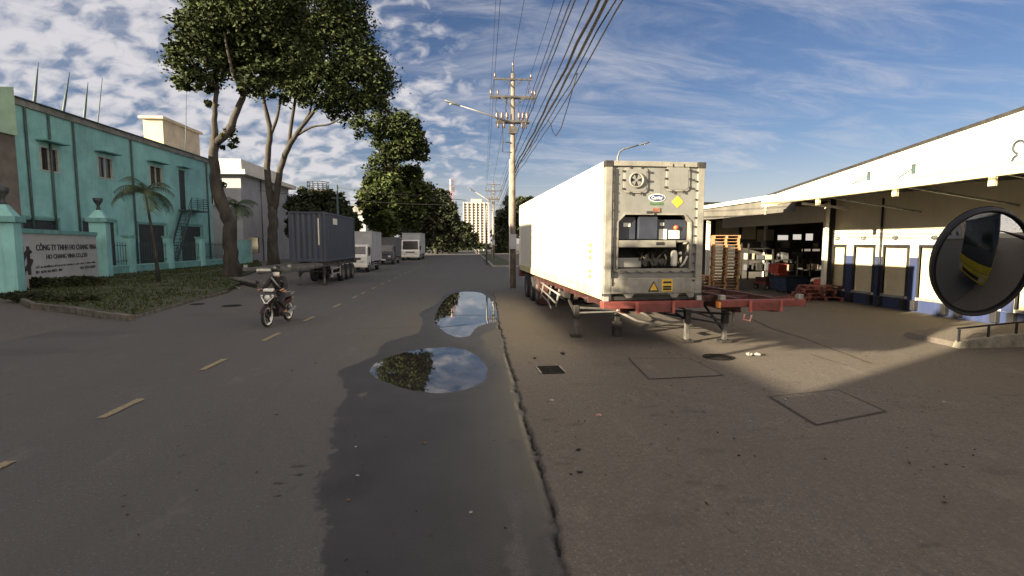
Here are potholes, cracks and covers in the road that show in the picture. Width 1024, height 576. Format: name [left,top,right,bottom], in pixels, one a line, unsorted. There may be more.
manhole cover [702,353,735,361]
manhole cover [768,389,888,425]
crack [493,296,560,557]
manhole cover [628,358,723,379]
